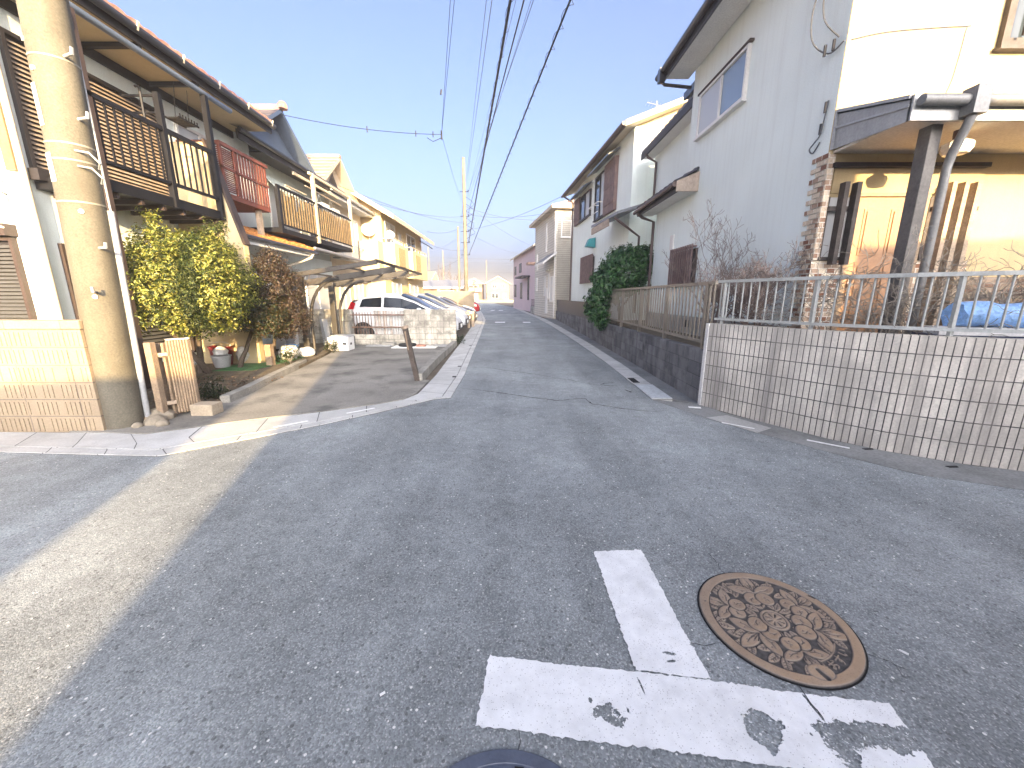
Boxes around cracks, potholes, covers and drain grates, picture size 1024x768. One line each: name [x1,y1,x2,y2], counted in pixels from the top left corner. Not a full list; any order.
manhole cover [697,572,869,691]
crack [462,367,656,412]
manhole cover [449,749,562,768]
